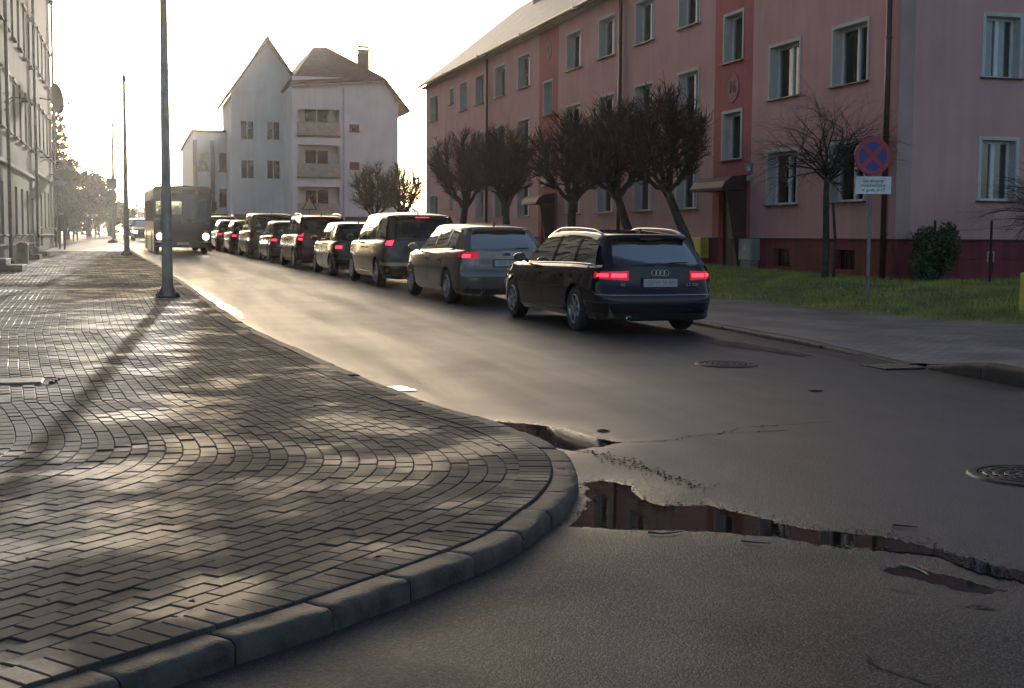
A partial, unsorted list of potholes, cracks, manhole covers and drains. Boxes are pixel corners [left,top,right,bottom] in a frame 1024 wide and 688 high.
crack [640,422,821,442]
crack [865,654,942,688]
manhole cover [966,464,1024,487]
manhole cover [695,360,759,368]
